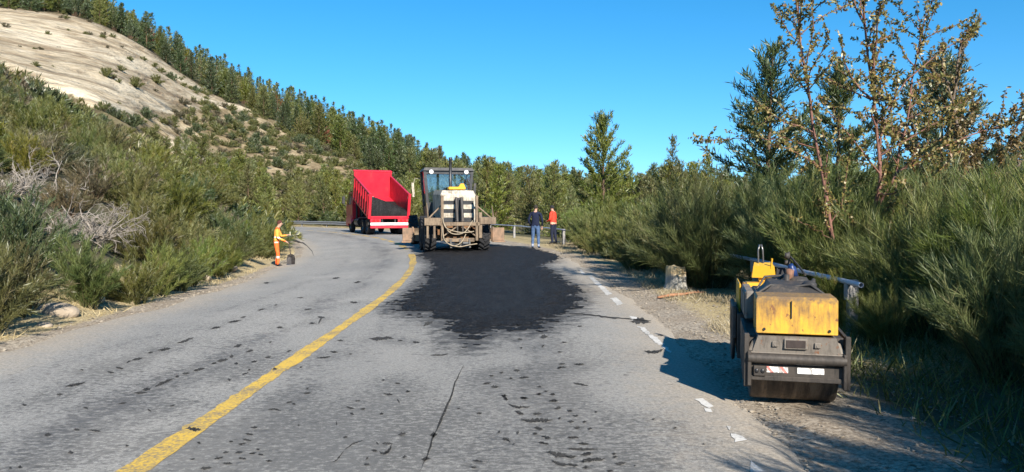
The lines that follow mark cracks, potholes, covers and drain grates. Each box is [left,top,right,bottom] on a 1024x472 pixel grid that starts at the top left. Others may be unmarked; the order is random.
crack [419,365,464,472]
crack [333,421,391,462]
